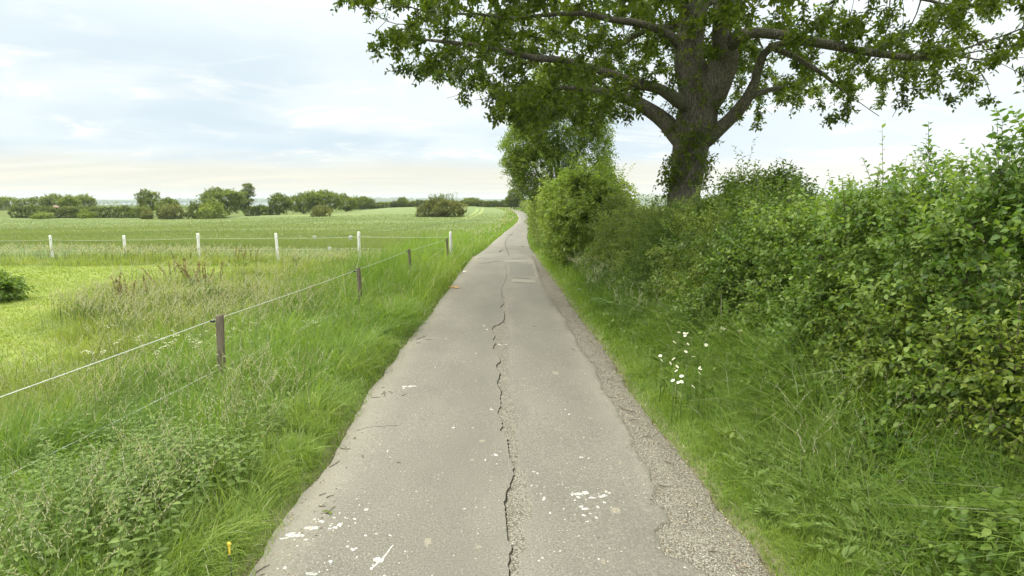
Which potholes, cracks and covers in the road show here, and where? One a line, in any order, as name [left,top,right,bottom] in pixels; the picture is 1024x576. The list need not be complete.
crack [492,265,515,576]
